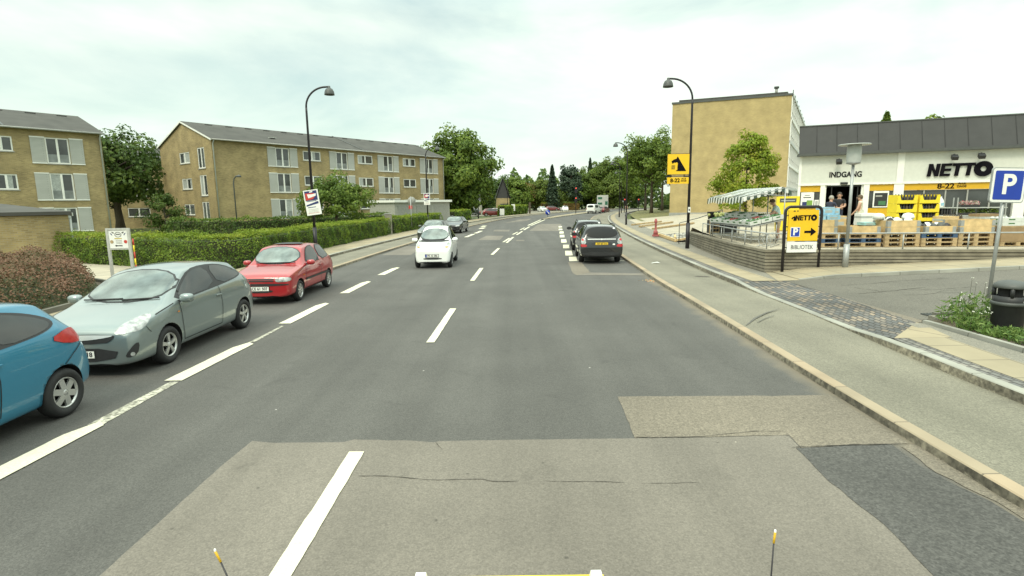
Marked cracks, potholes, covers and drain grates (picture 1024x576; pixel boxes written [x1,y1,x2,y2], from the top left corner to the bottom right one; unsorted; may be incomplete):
crack [371,475,694,483]
